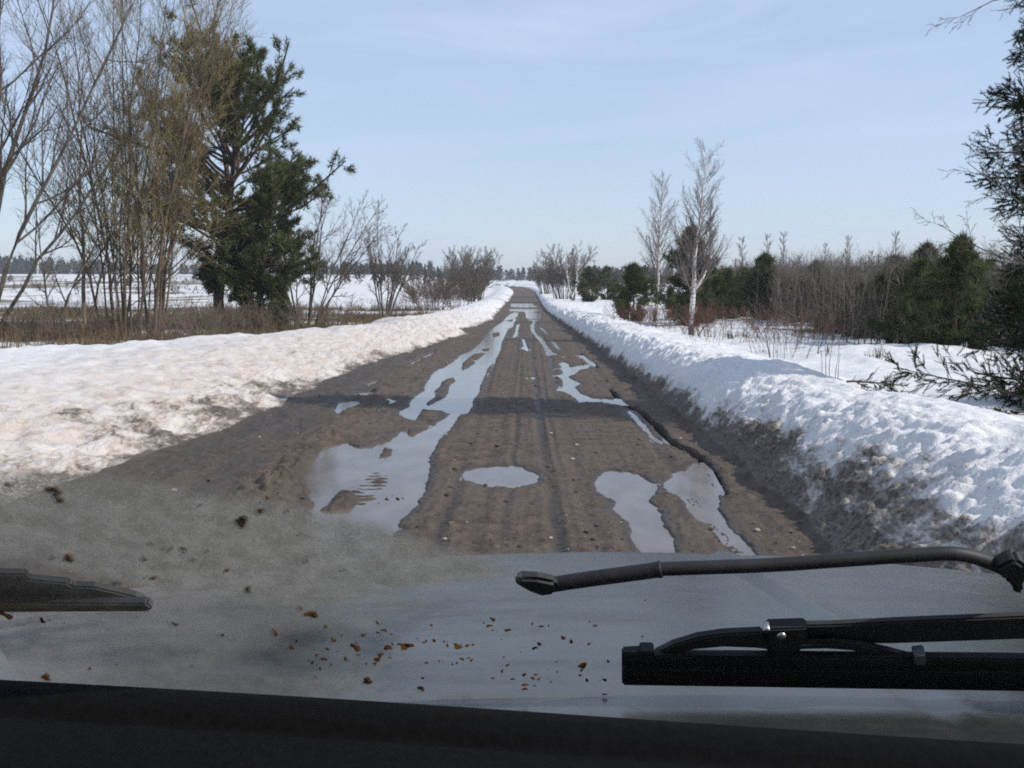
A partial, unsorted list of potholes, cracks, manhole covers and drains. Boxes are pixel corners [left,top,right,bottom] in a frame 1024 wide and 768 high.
pothole [590,468,682,553]
pothole [458,463,545,489]
